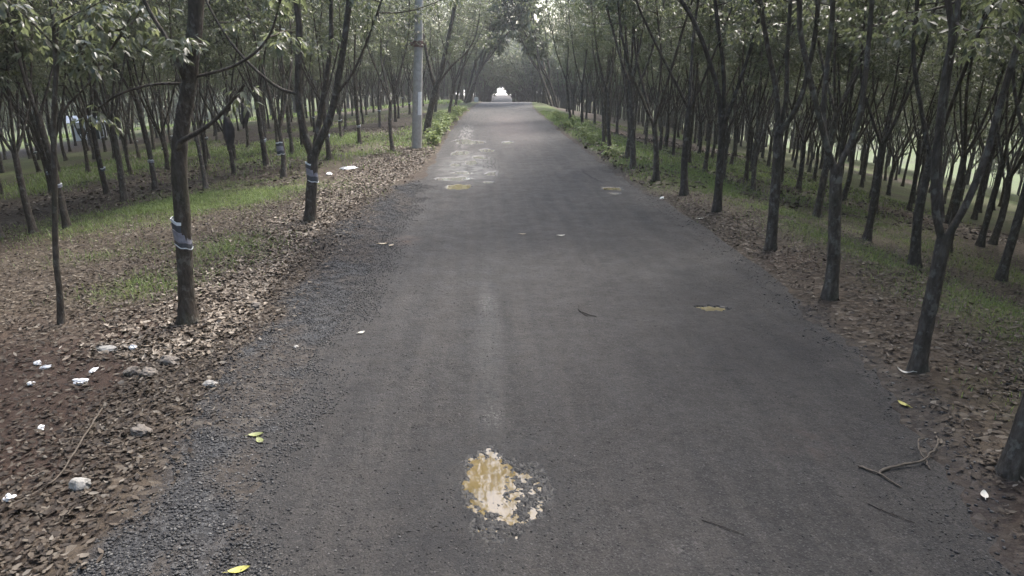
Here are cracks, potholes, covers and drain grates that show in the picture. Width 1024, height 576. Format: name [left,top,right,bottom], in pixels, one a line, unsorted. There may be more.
pothole [456,442,561,554]
pothole [693,304,737,312]
